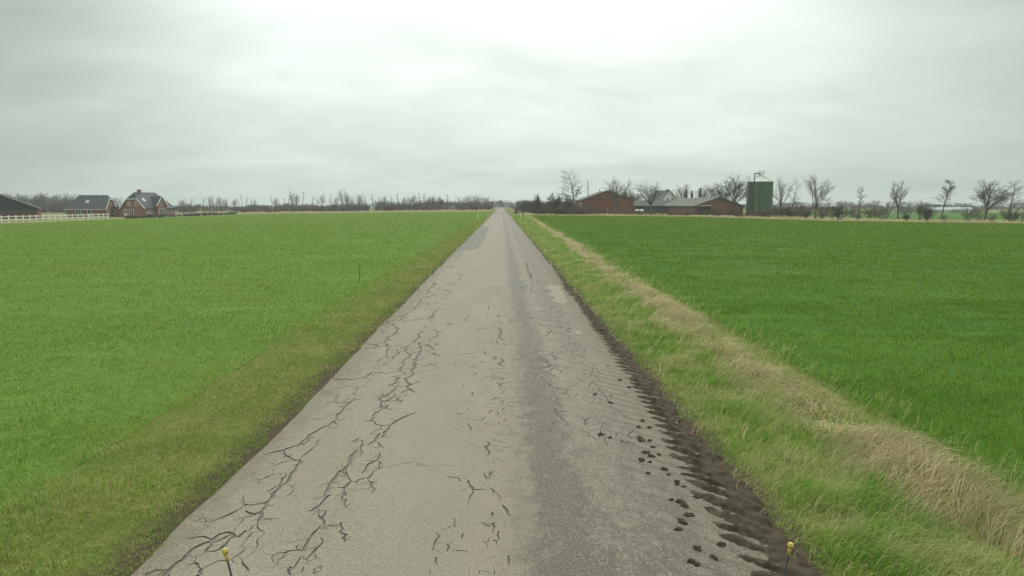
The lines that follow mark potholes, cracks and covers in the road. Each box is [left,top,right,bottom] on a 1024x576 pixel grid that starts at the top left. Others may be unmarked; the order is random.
crack [143,263,636,576]
